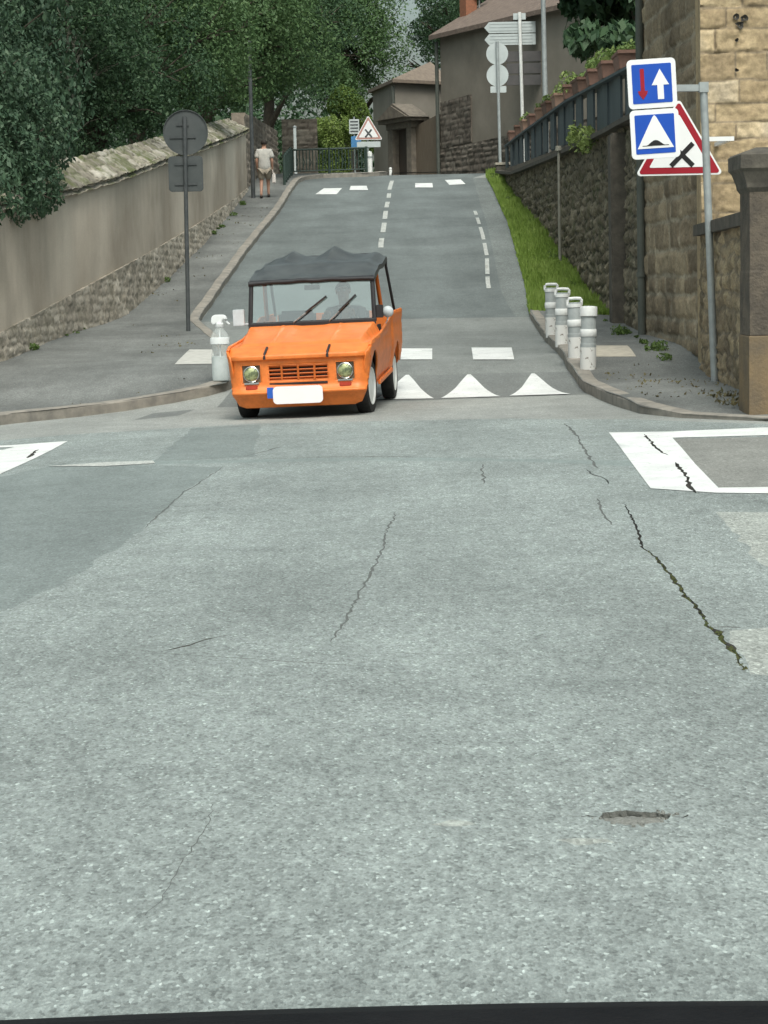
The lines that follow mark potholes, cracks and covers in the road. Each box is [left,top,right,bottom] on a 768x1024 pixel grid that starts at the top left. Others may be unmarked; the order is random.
pothole [582,809,688,827]
crack [131,511,438,667]
crack [65,468,251,528]
crack [564,424,748,671]
crack [145,804,213,915]
